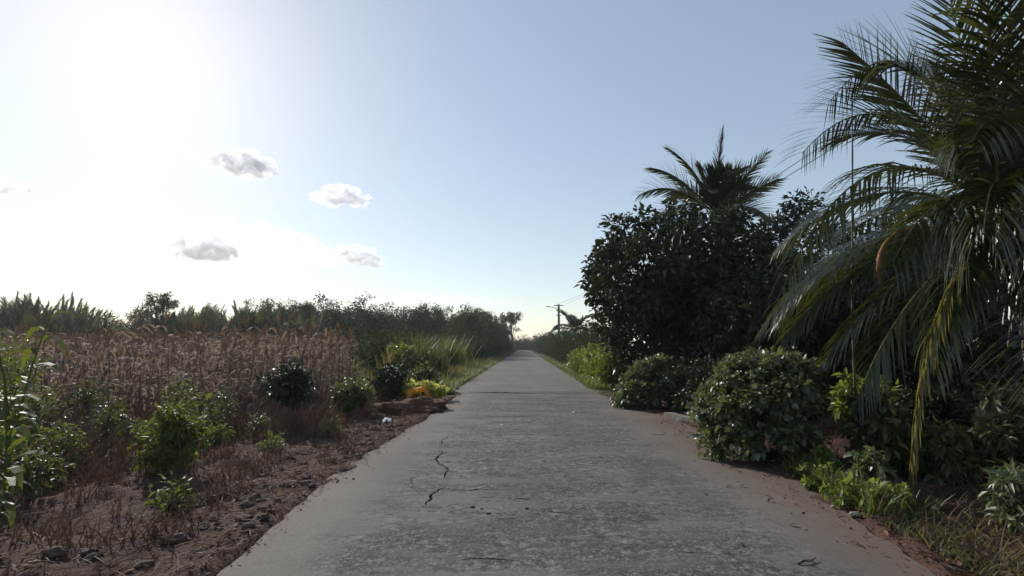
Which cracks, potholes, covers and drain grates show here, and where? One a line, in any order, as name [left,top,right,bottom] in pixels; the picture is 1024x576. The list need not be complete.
crack [404,435,496,507]
